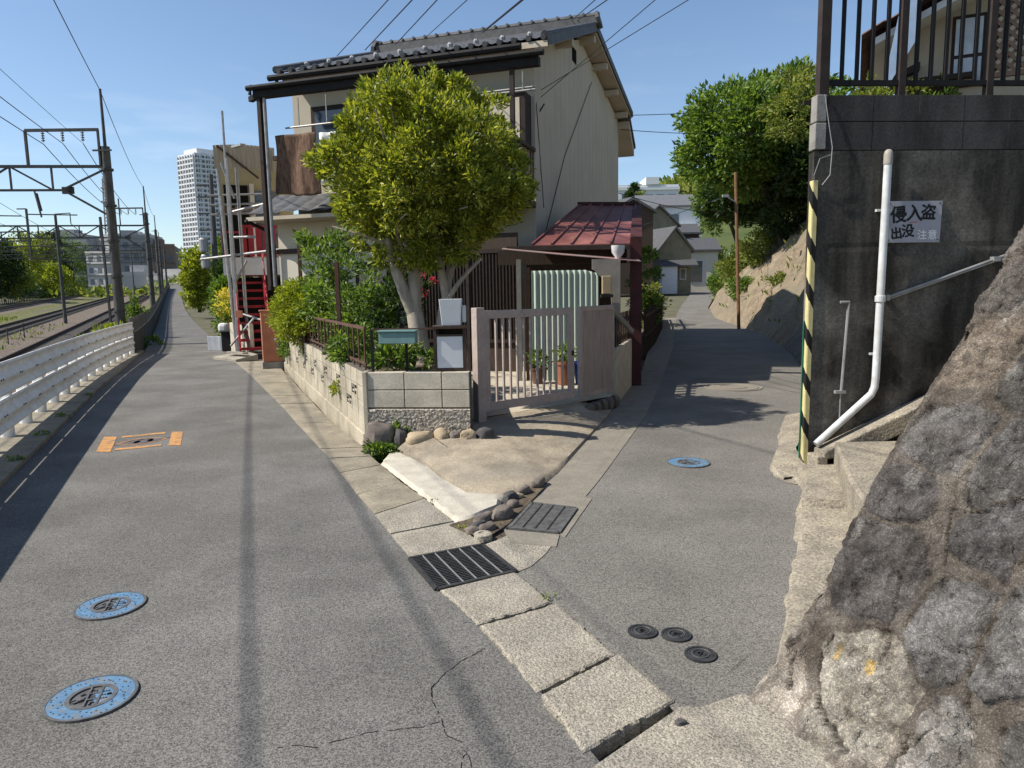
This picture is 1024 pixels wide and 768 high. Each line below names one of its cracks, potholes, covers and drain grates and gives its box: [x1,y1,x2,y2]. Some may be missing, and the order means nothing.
utility cover [628,624,657,640]
manhole cover [73,591,147,621]
crack [277,648,484,767]
utility cover [684,646,717,664]
manhole cover [704,383,763,392]
drain grate [408,543,518,592]
drain grate [508,502,578,534]
manhole cover [667,457,710,468]
utility cover [661,627,692,643]
manhole cover [41,674,139,724]
